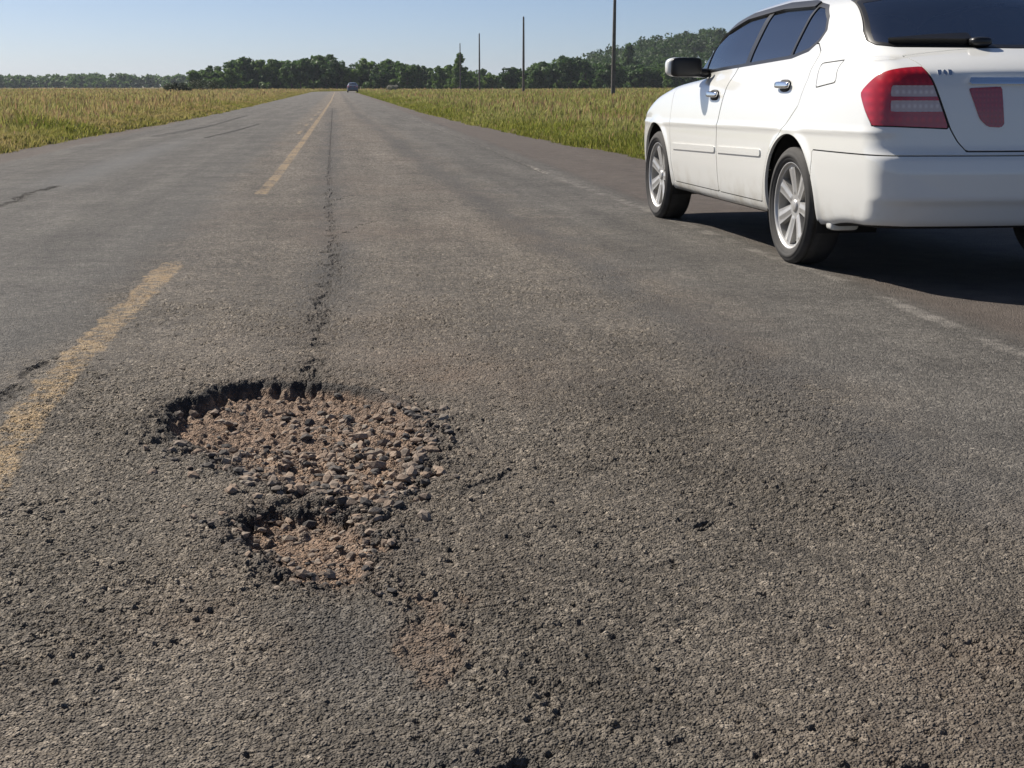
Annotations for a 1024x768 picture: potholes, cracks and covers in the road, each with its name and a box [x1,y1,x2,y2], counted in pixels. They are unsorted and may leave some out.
pothole [143,379,498,543]
crack [0,358,55,407]
crack [0,185,62,207]
crack [298,110,377,382]
